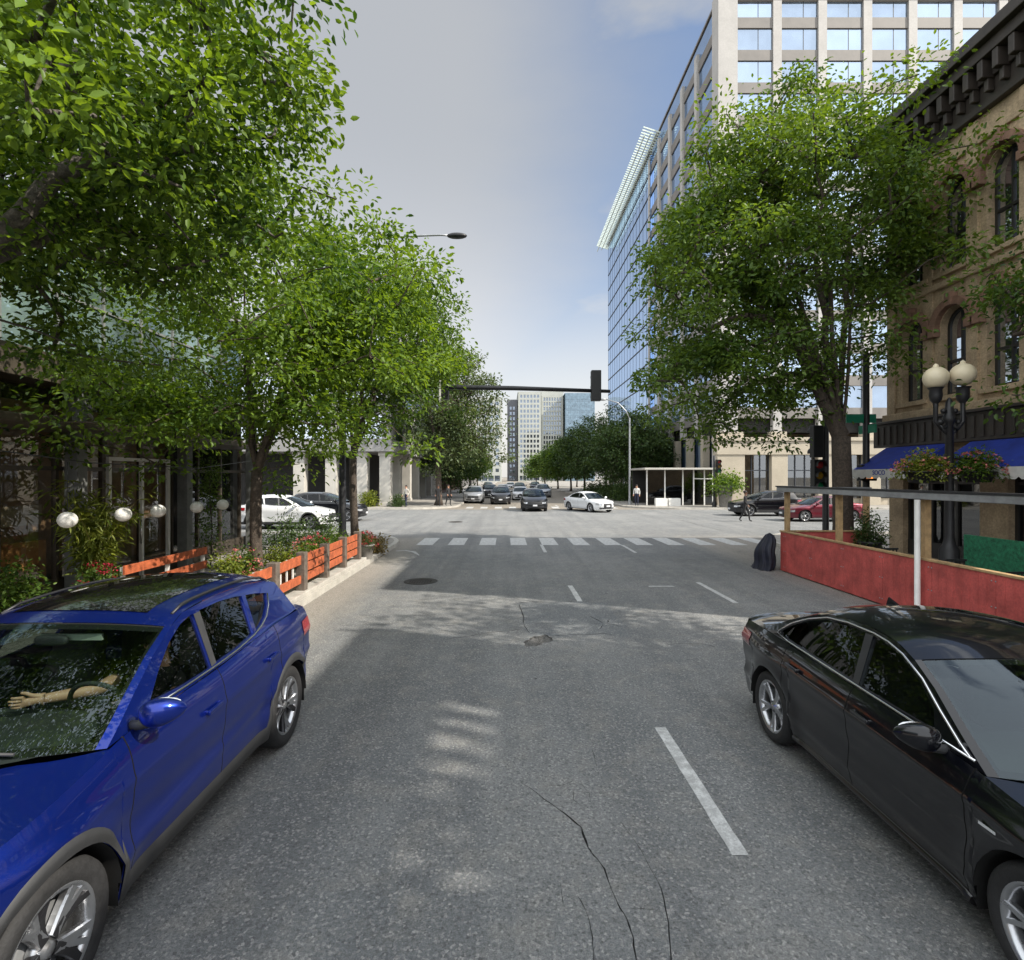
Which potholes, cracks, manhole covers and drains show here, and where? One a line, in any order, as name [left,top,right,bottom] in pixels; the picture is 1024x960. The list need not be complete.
crack [522,782,672,960]
pothole [524,635,553,647]
